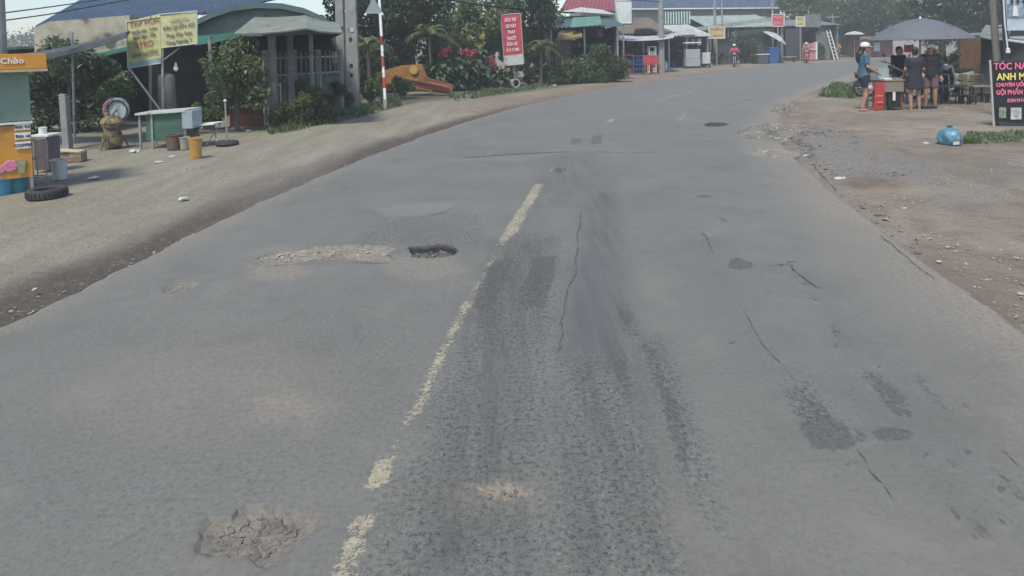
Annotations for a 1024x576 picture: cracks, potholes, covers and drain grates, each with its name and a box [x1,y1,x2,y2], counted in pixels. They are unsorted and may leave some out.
pothole [169,491,345,576]
pothole [150,278,211,298]
pothole [388,242,467,262]
crack [766,259,820,288]
pothole [246,242,412,266]
